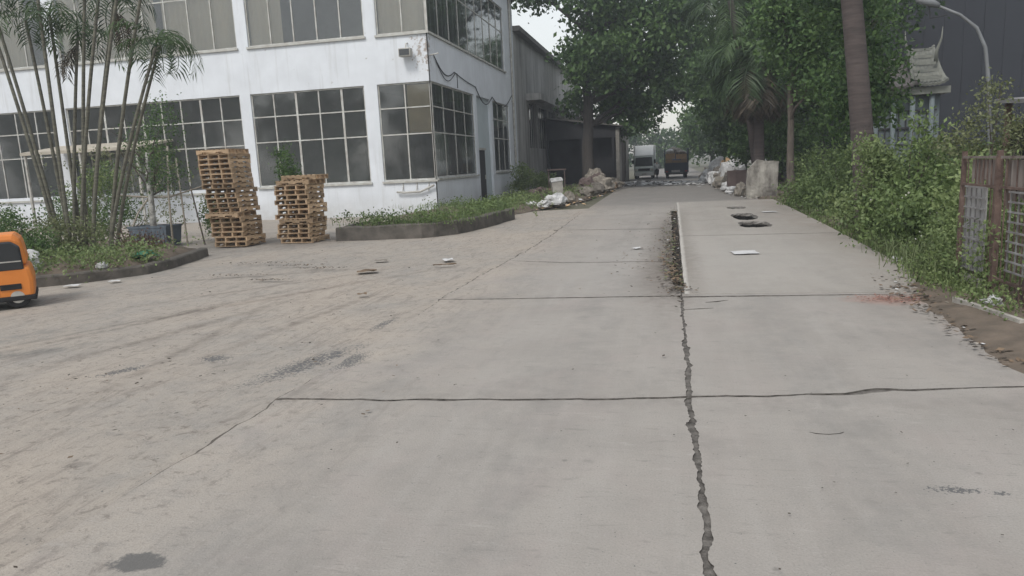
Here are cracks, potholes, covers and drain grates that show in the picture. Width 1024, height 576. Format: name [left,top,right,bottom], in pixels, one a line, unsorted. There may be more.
crack [128,218,1024,576]
